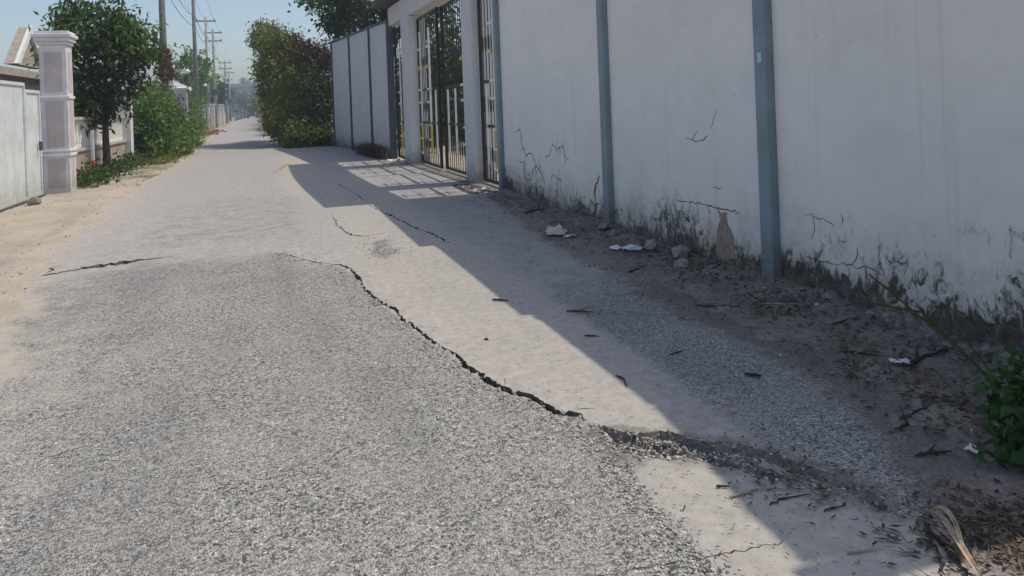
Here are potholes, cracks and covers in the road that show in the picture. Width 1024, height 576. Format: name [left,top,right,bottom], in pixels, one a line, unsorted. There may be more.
crack [598,541,783,576]
crack [42,256,172,276]
crack [281,253,595,420]
